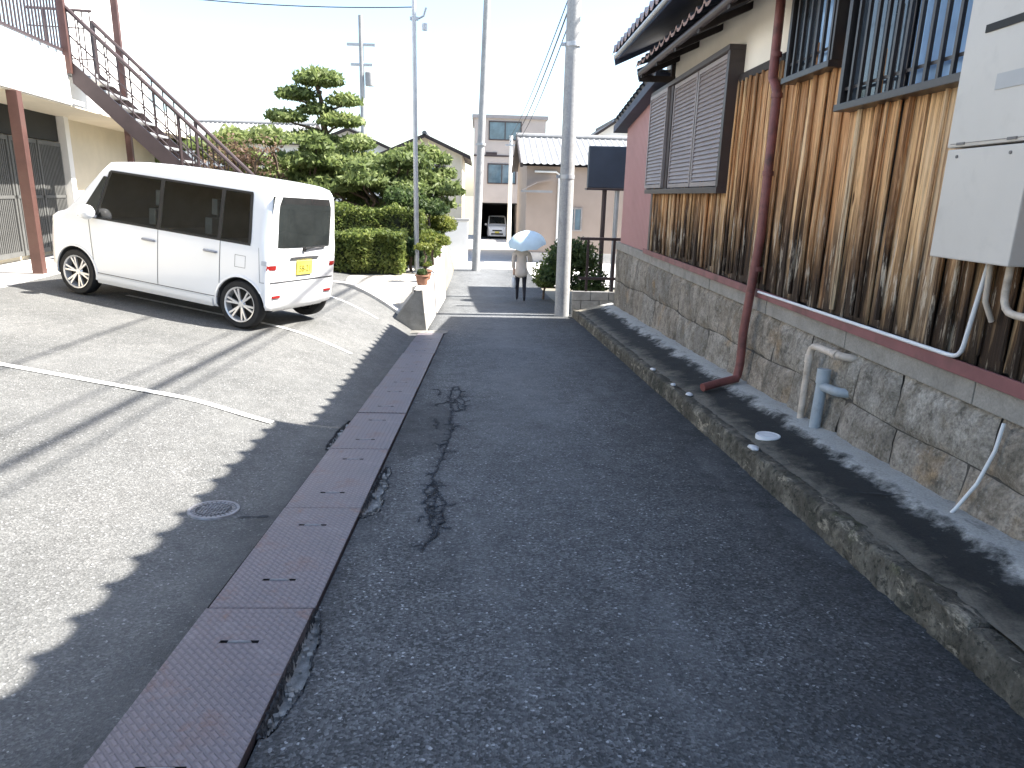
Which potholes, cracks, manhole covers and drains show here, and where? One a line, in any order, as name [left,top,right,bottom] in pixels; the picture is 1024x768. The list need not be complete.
pothole [325,421,351,450]
pothole [256,611,323,739]
crack [415,386,469,551]
manhole cover [187,500,240,520]
pothole [358,467,392,519]
